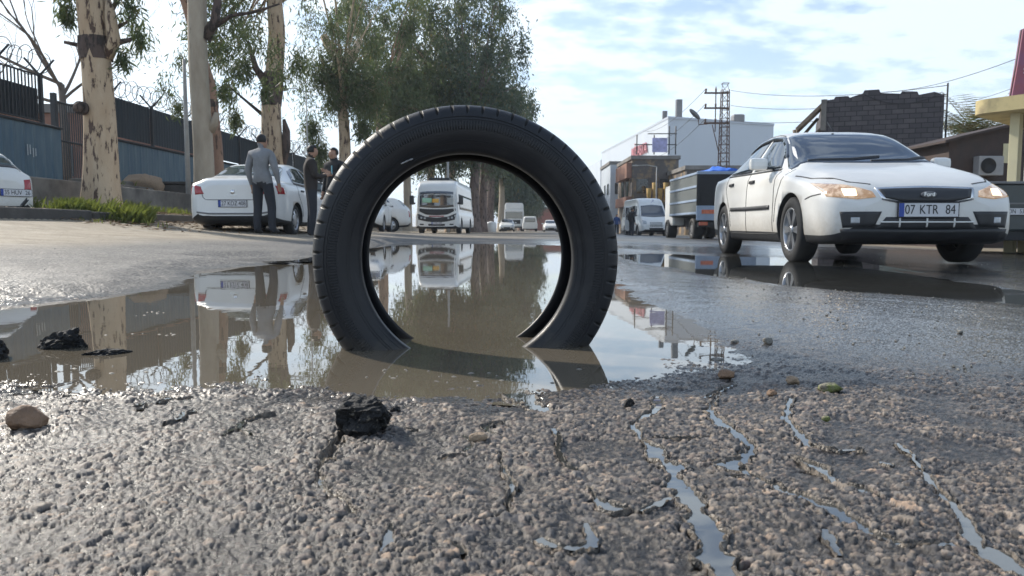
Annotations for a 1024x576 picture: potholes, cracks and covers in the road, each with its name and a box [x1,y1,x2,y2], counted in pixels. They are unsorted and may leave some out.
pothole [0,243,751,406]
crack [442,383,1024,576]
crack [315,431,394,552]
